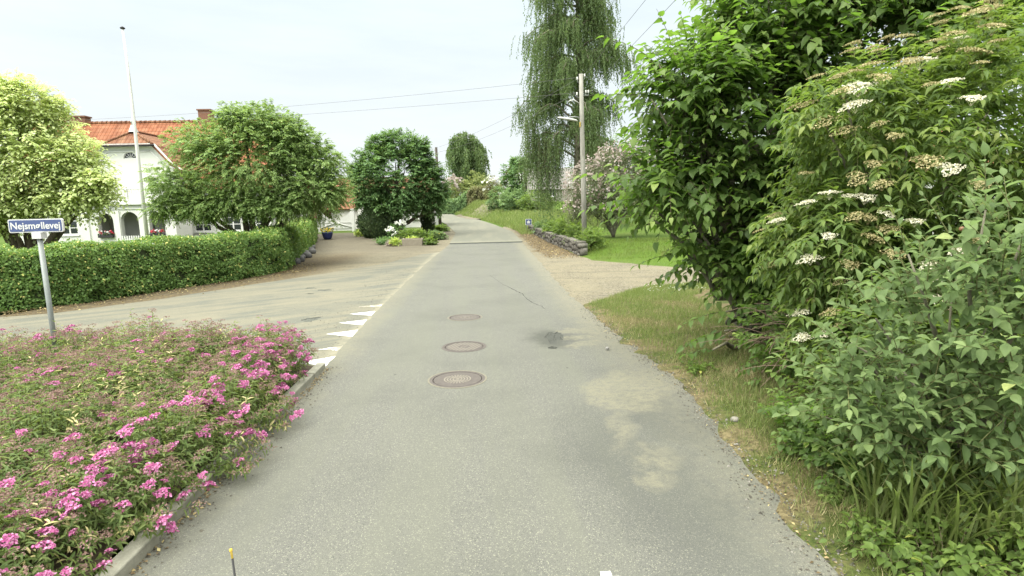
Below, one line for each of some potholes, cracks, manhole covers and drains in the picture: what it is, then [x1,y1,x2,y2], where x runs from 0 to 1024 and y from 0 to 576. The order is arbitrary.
pothole [544,331,564,344]
manhole cover [428,370,487,389]
manhole cover [442,341,486,352]
